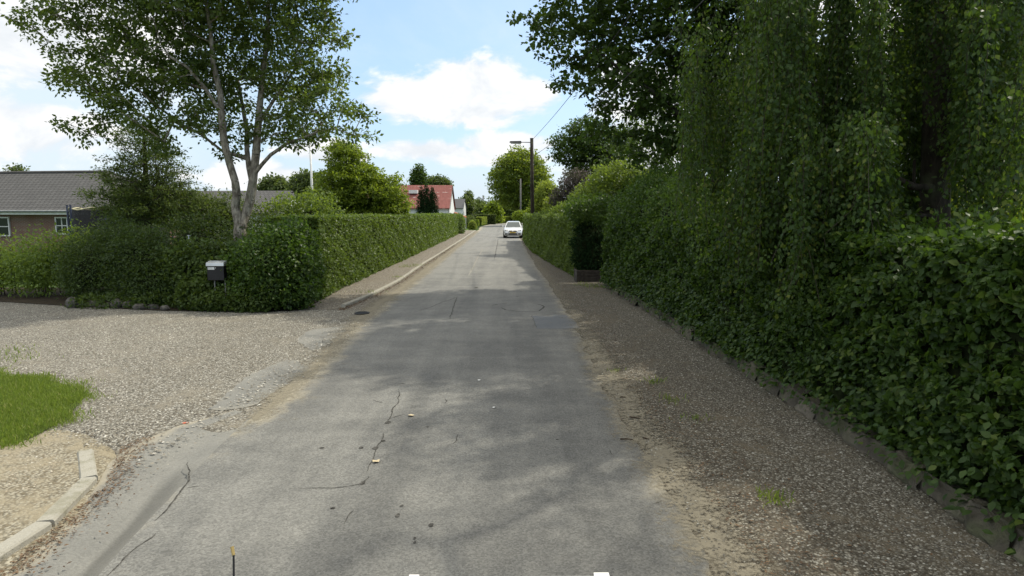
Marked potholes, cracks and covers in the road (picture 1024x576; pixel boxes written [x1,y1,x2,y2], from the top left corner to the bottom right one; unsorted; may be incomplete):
crack [107,462,197,576]
crack [334,383,404,488]
